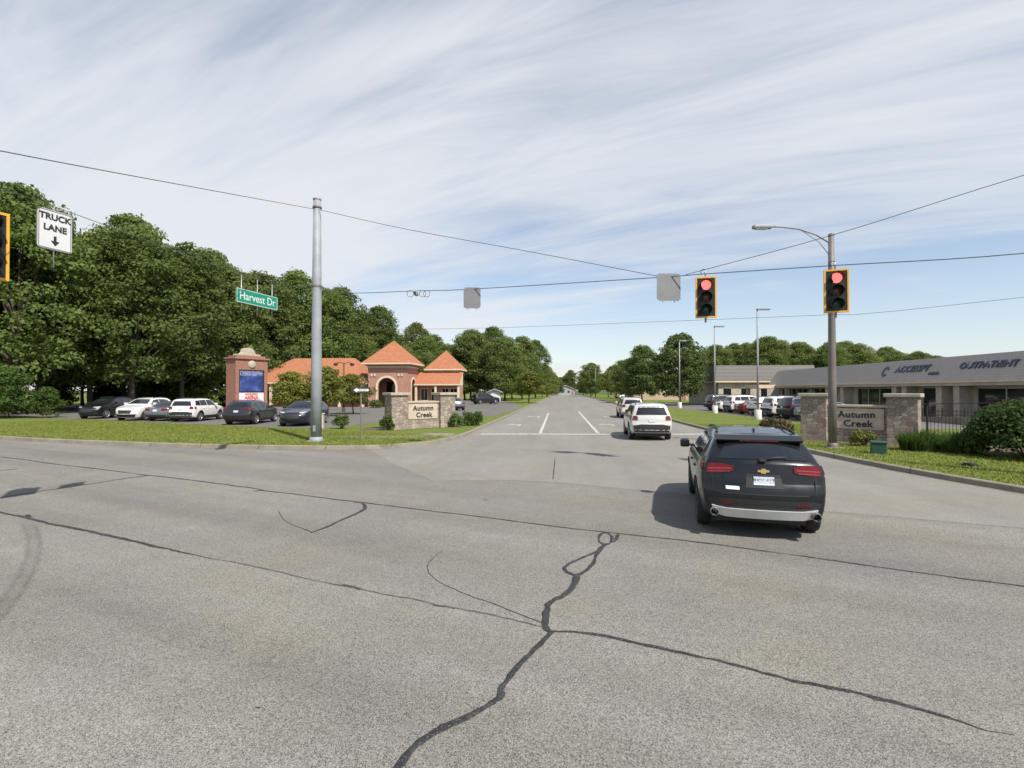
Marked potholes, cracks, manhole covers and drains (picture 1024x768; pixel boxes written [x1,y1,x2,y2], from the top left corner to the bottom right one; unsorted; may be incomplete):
crack [427,550,542,623]
